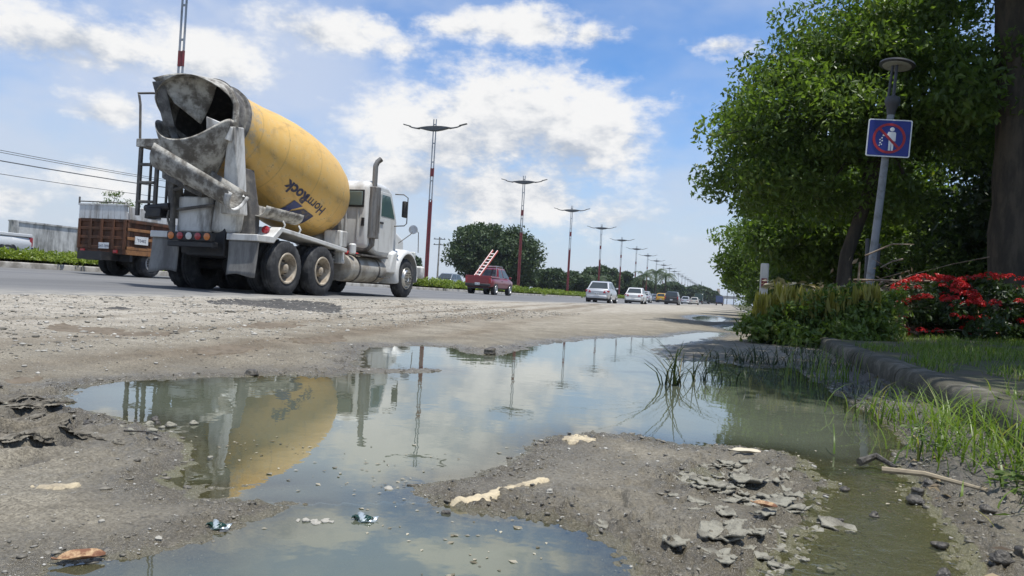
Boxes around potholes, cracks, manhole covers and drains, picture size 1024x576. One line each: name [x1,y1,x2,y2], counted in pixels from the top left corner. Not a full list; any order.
pothole [89,332,889,495]
pothole [150,501,579,576]
